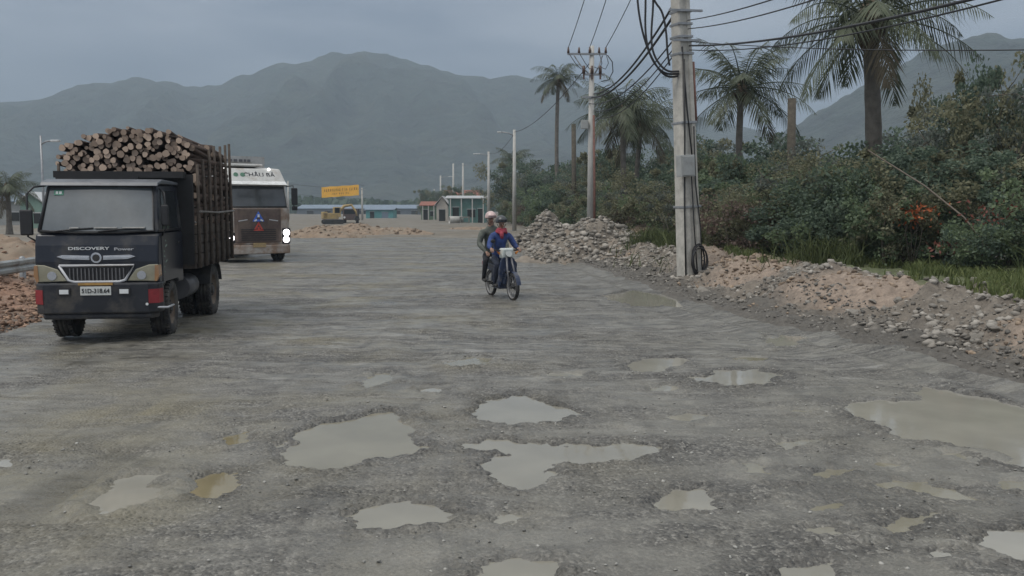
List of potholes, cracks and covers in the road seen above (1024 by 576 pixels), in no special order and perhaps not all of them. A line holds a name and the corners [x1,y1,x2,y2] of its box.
pothole [257,406,464,479]
pothole [596,289,690,309]
pothole [327,492,487,538]
pothole [146,464,271,503]
pothole [830,381,1024,470]
pothole [442,432,691,497]
pothole [854,471,1008,507]
pothole [55,466,198,525]
